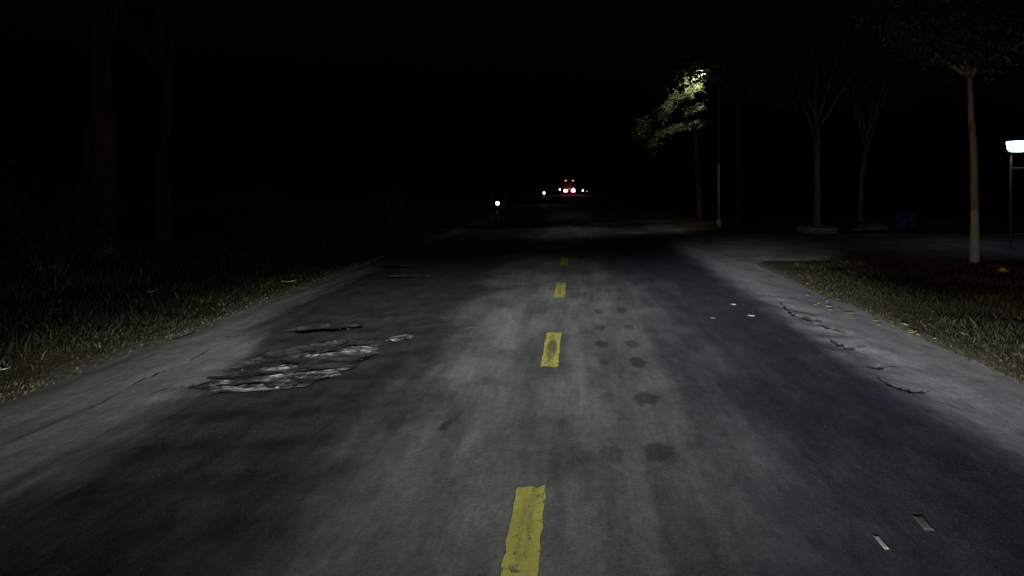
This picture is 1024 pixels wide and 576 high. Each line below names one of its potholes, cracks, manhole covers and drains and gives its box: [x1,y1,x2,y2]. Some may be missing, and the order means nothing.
pothole [181,339,384,394]
pothole [385,334,413,342]
pothole [284,323,364,334]
crack [91,335,240,408]
crack [781,304,958,408]
